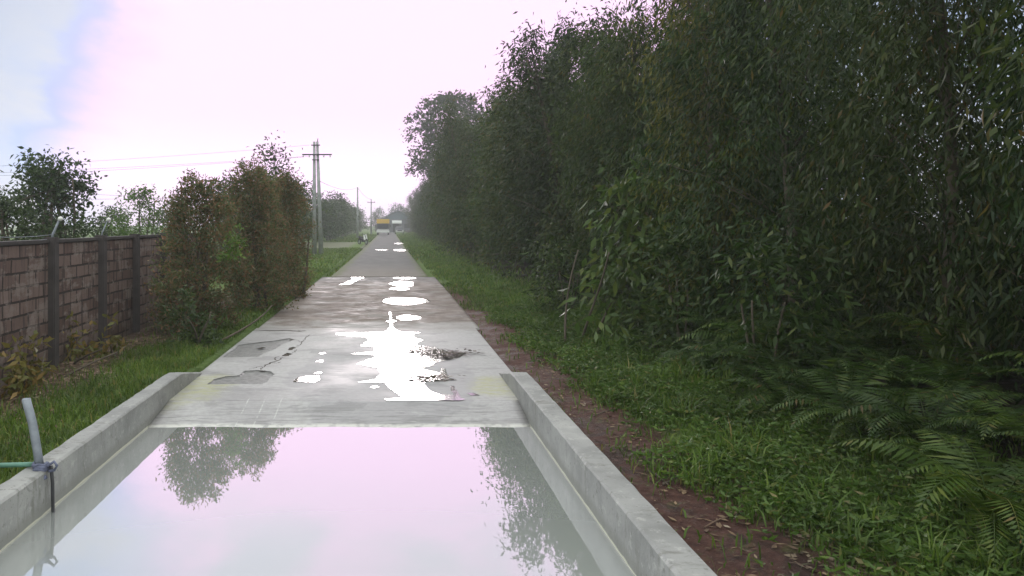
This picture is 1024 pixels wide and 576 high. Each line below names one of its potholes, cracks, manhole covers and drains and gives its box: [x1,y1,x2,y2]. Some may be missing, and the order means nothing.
crack [256,330,309,370]
pothole [224,338,294,357]
pothole [208,370,275,384]
